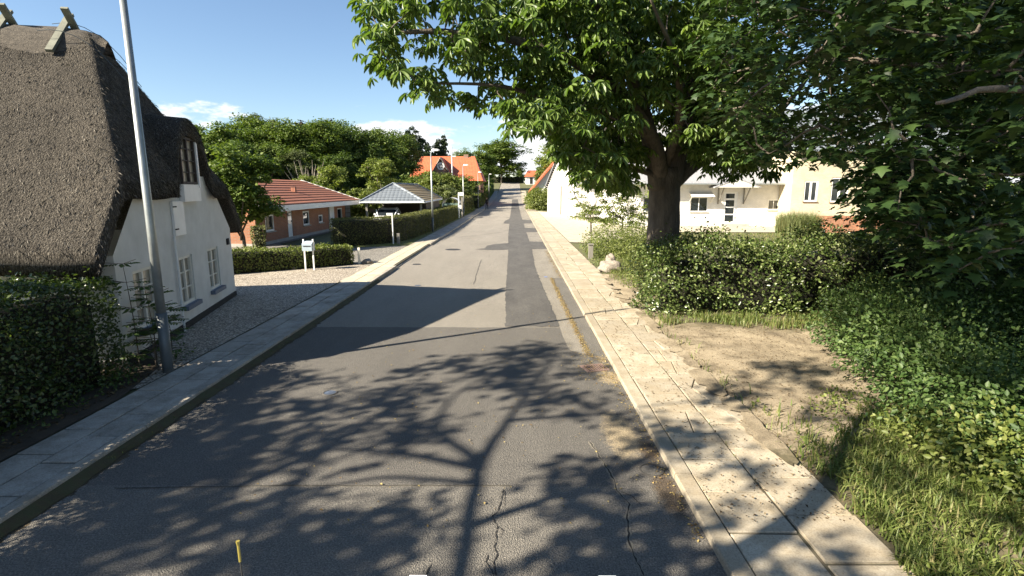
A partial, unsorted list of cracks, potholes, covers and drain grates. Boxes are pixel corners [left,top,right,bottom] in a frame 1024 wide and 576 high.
crack [588,441,646,576]
drain grate [580,363,610,373]
crack [116,484,512,575]
